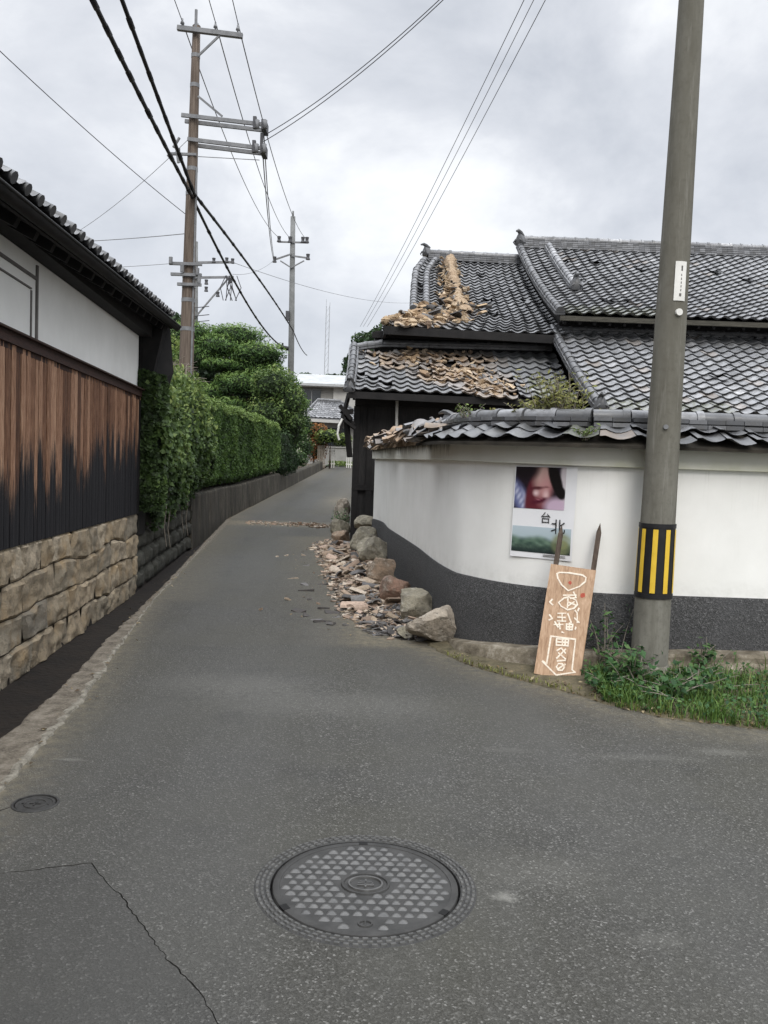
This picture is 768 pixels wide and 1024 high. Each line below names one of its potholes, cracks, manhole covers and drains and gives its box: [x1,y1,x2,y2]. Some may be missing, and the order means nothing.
utility cover [10,794,60,813]
manhole cover [254,835,477,948]
crack [6,863,218,1024]
